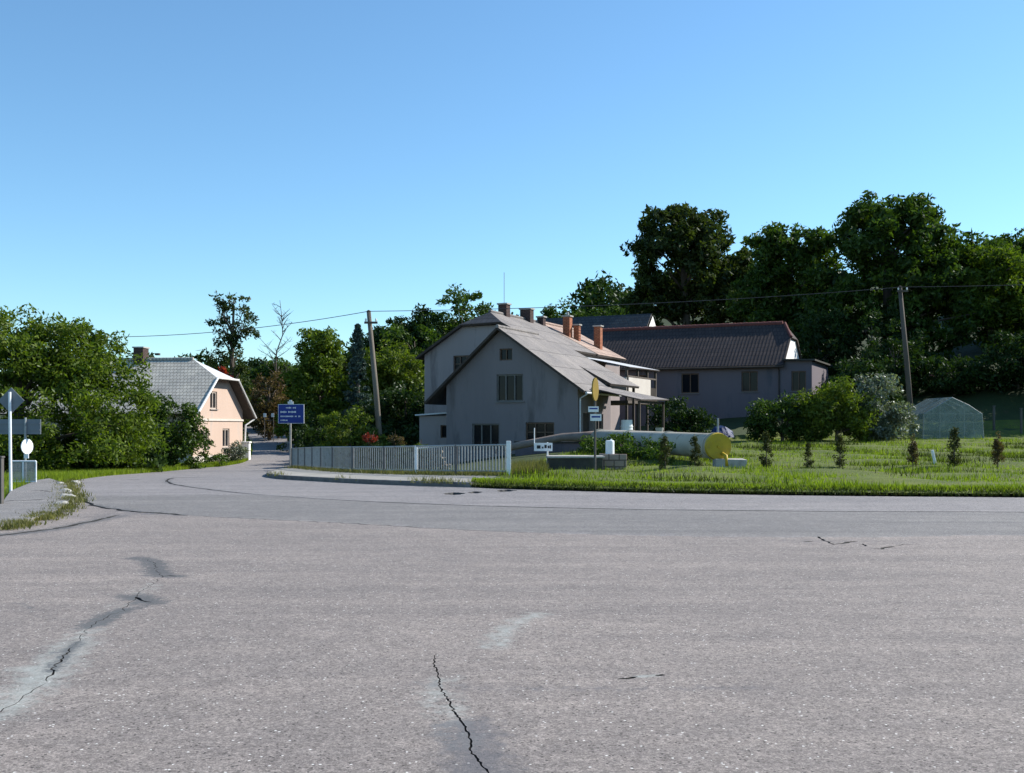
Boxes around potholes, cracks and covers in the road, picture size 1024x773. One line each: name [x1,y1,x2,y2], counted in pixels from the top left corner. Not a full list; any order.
crack [804,537,906,550]
crack [0,560,171,712]
crack [432,655,489,773]
